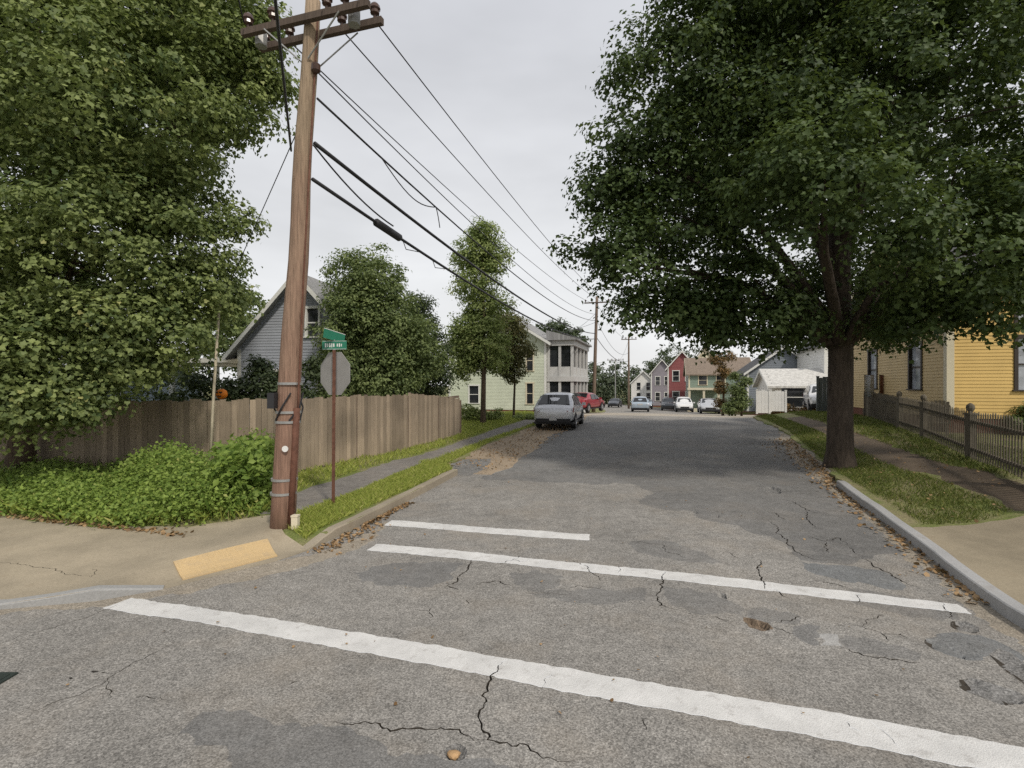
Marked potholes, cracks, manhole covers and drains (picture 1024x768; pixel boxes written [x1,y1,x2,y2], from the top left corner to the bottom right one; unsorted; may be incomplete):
crack [447,561,507,603]
crack [334,661,576,765]
crack [36,647,165,711]
pothole [743,617,773,631]
crack [767,499,952,619]
crack [656,573,676,610]
